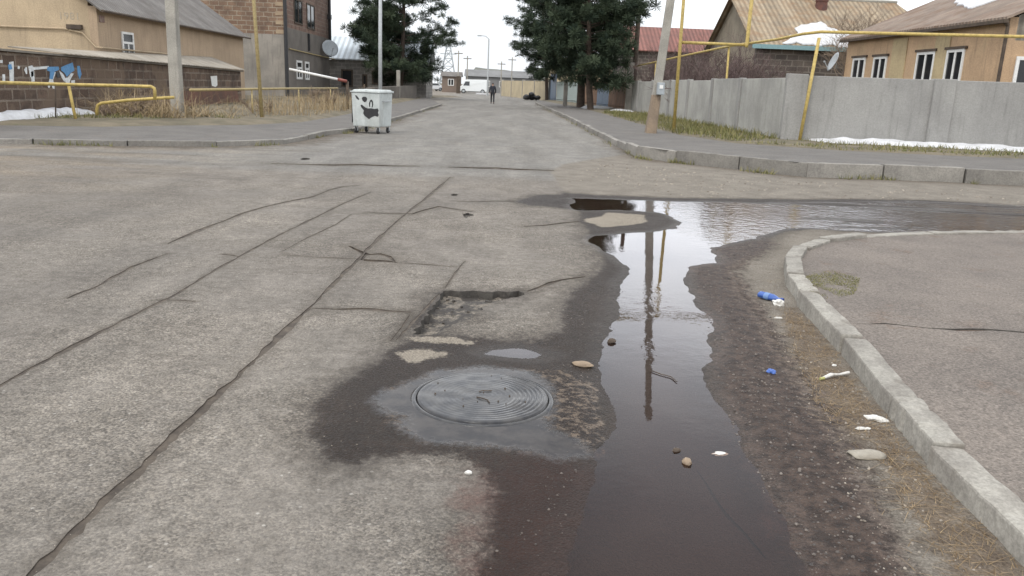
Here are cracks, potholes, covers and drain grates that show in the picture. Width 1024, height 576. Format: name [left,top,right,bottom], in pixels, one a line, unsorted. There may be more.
crack [384,201,514,214]
crack [874,323,1024,333]
pothole [413,290,524,335]
manhole cover [411,372,554,427]
crack [0,185,463,387]
